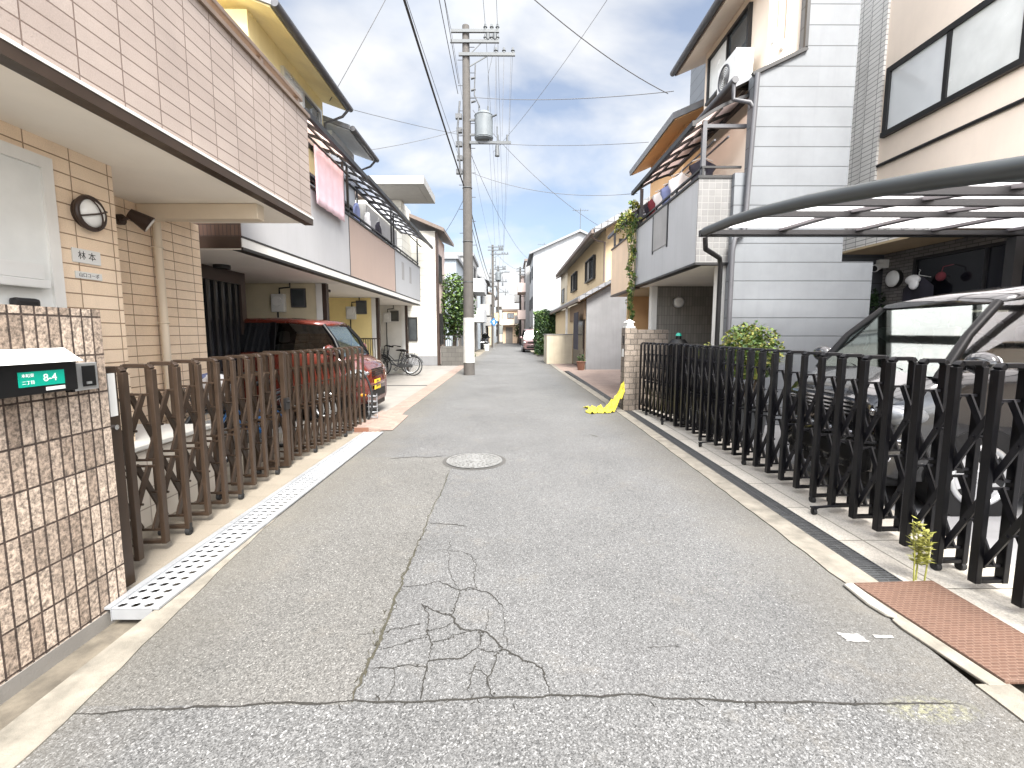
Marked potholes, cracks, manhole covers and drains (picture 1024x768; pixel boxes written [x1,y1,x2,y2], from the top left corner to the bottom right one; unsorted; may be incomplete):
drain grate [637,419,665,432]
drain grate [684,450,734,475]
drain grate [657,432,694,450]
drain grate [721,475,797,515]
crack [74,540,970,714]
manhole cover [442,453,506,470]
drain grate [780,515,903,582]
